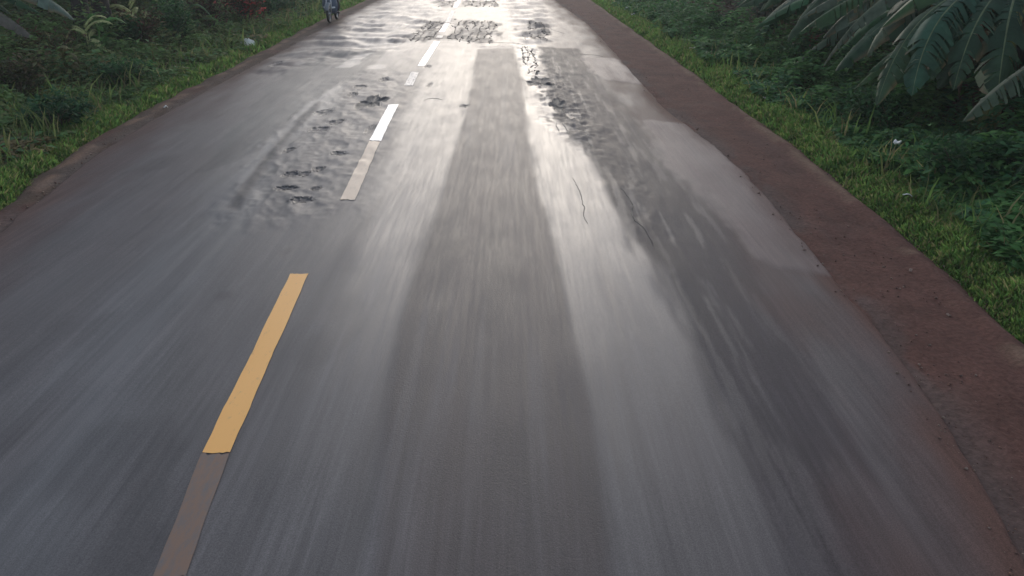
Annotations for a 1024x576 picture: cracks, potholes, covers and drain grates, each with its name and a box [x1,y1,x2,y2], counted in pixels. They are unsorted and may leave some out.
pothole [286,196,315,204]
pothole [350,92,393,111]
pothole [523,75,559,89]
pothole [546,96,567,116]
